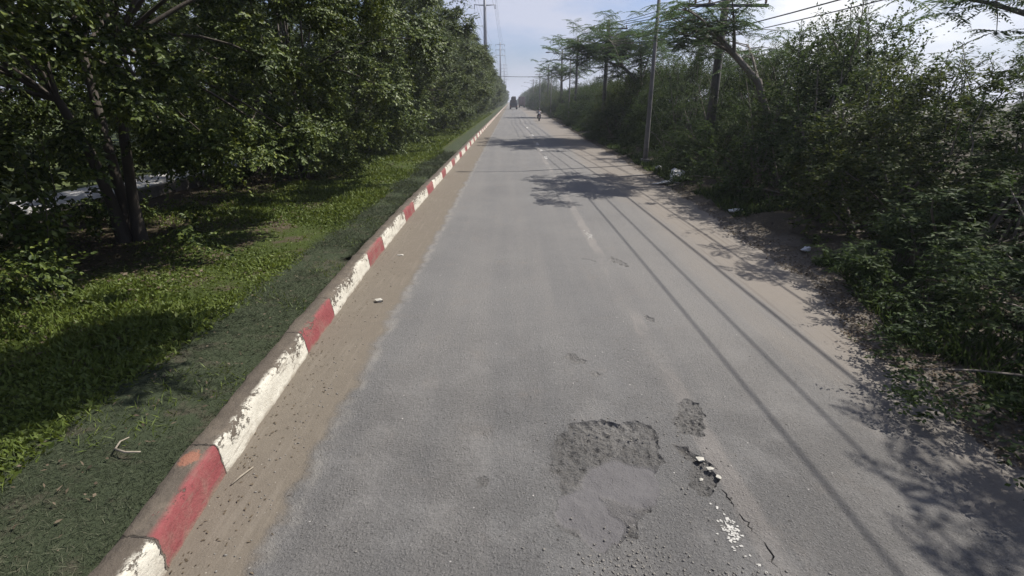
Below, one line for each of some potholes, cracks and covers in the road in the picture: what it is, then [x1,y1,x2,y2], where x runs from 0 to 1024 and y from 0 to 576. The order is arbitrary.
pothole [548,419,666,554]
pothole [564,352,587,364]
crack [721,489,783,576]
pothole [672,398,707,437]
